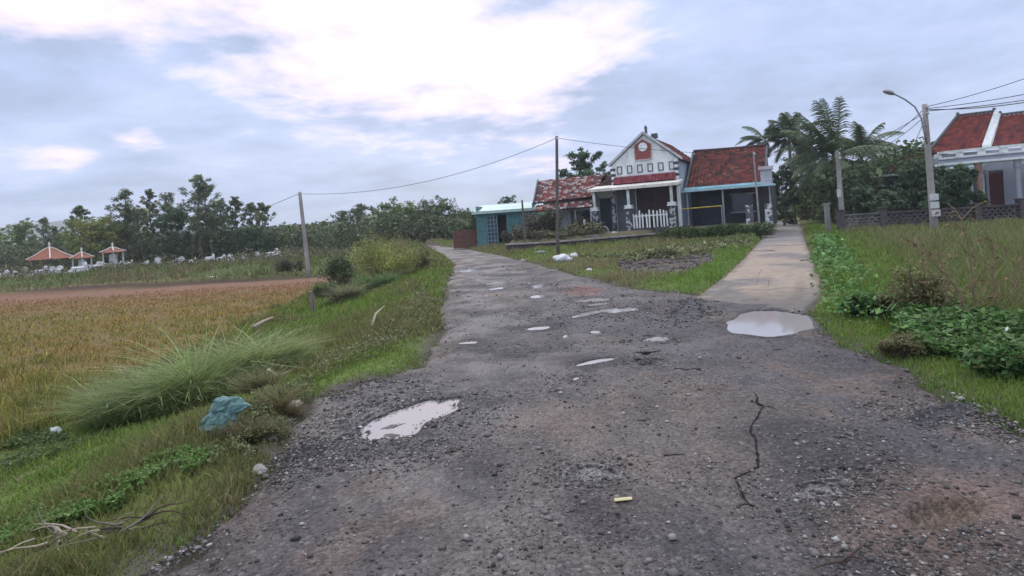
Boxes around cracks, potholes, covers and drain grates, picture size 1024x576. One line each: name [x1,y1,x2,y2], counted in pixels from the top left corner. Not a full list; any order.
pothole [897,494,990,533]
pothole [724,309,819,337]
pothole [568,307,643,318]
pothole [353,394,466,442]
crack [734,392,775,509]
pothole [572,357,618,367]
